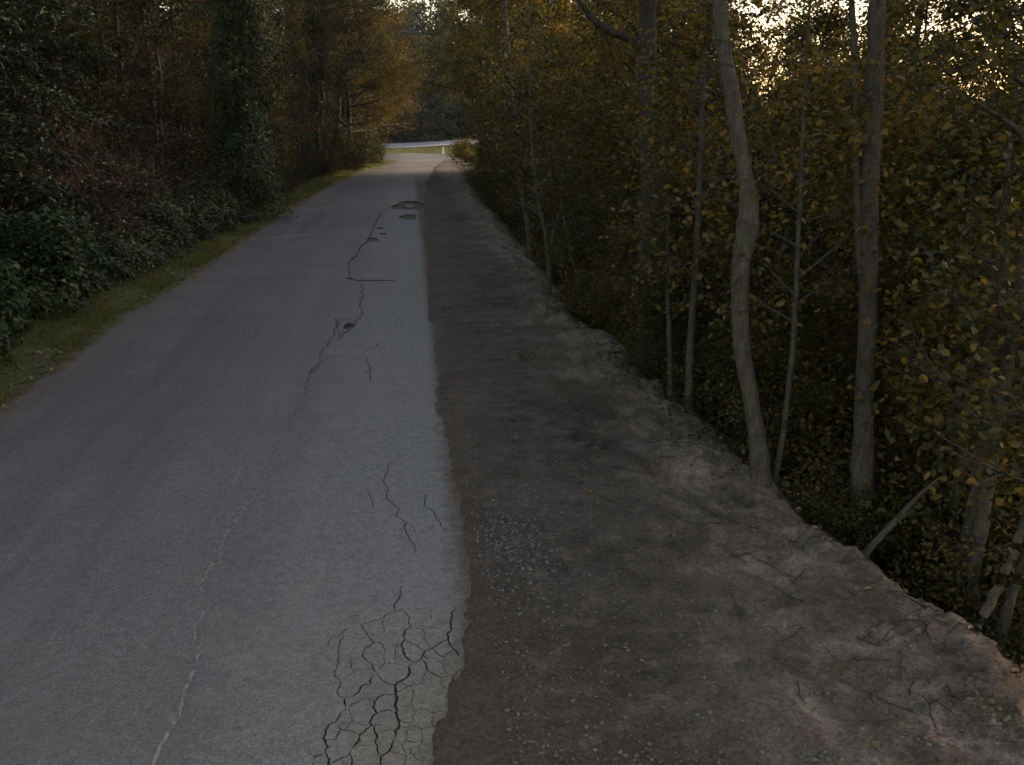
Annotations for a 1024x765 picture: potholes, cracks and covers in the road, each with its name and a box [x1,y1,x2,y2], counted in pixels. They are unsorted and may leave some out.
crack [152,205,394,765]
crack [366,463,446,552]
